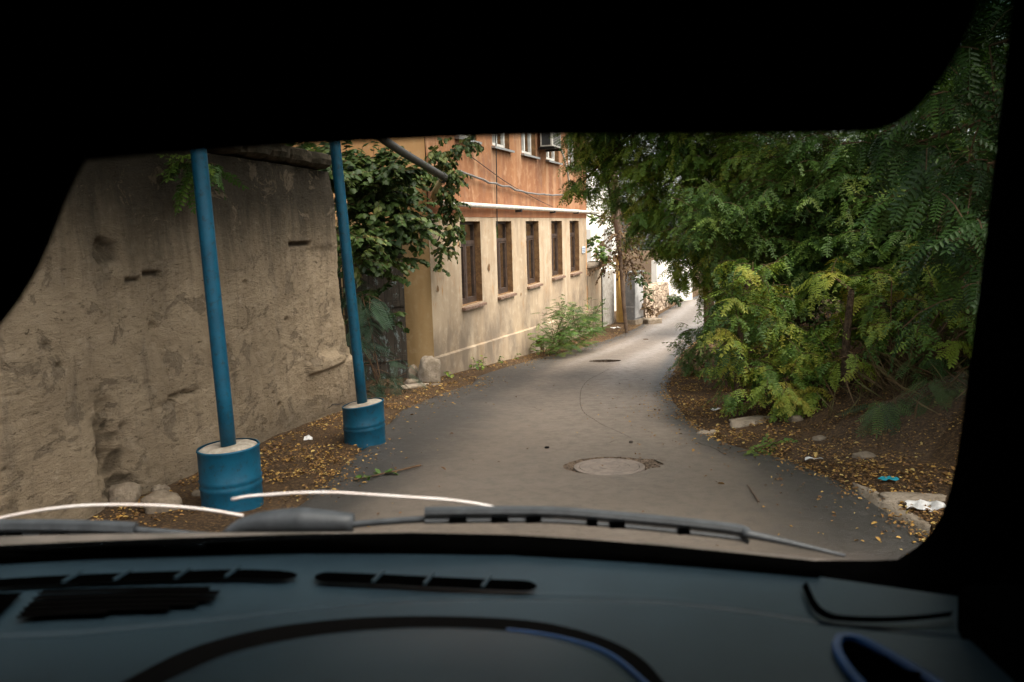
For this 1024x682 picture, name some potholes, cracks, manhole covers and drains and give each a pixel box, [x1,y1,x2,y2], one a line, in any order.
manhole cover [574,458,645,475]
